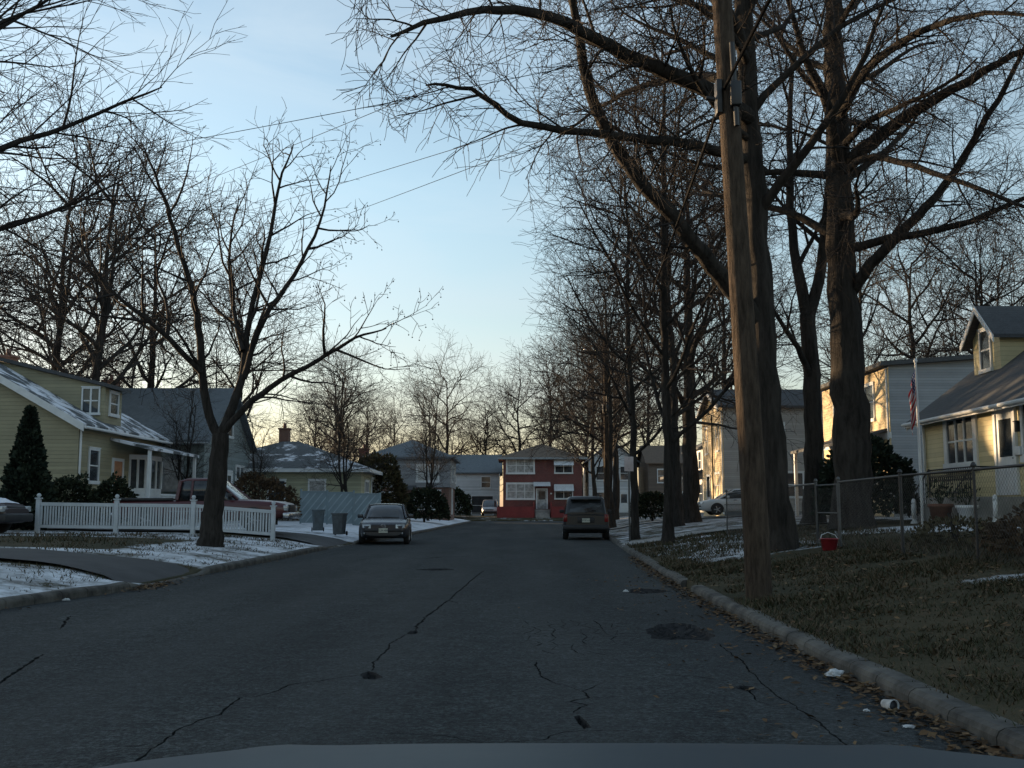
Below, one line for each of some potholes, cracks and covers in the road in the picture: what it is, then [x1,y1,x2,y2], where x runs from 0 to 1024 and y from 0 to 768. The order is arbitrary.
pothole [574,715,591,729]
crack [667,642,848,745]
crack [0,654,44,684]
pothole [360,671,382,680]
crack [390,620,641,742]
crack [124,556,484,762]
